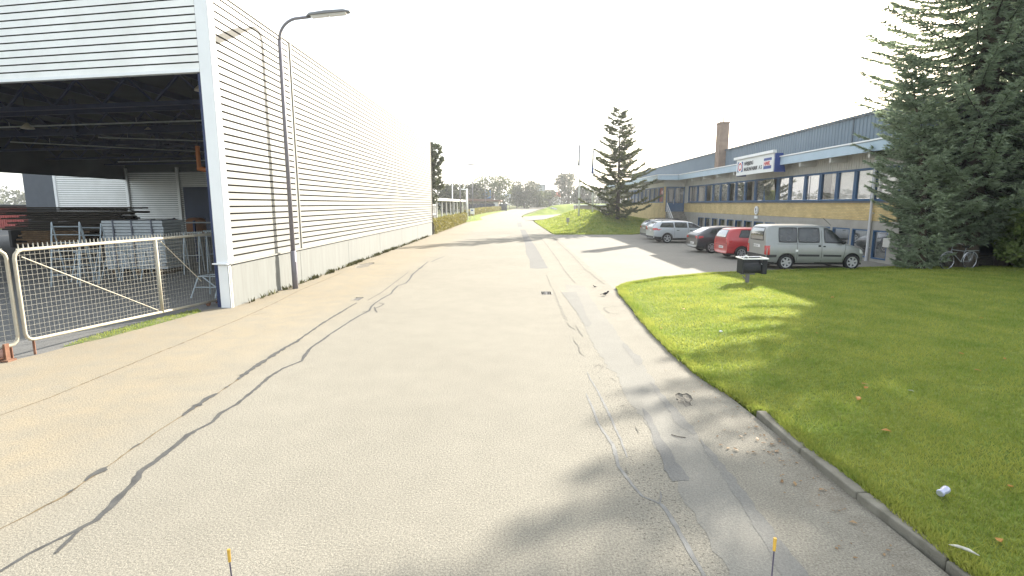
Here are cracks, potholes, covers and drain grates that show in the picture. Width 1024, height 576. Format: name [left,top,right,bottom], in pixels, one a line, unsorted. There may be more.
pothole [675,393,693,407]
crack [540,237,639,474]
crack [0,274,356,529]
